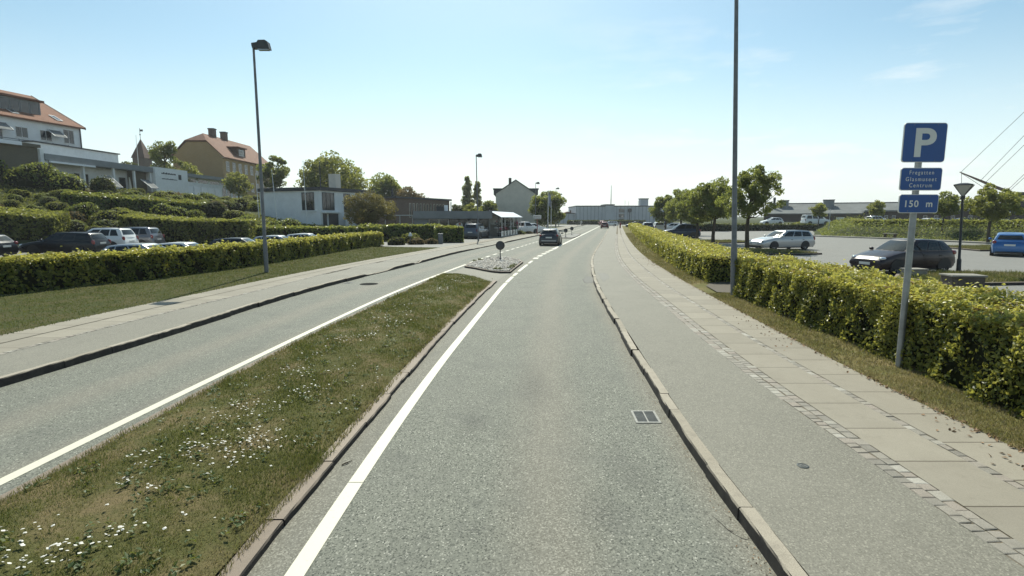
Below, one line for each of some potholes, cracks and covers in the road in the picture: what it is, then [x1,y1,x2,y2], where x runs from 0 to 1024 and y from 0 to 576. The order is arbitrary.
drain grate [630,410,662,423]
